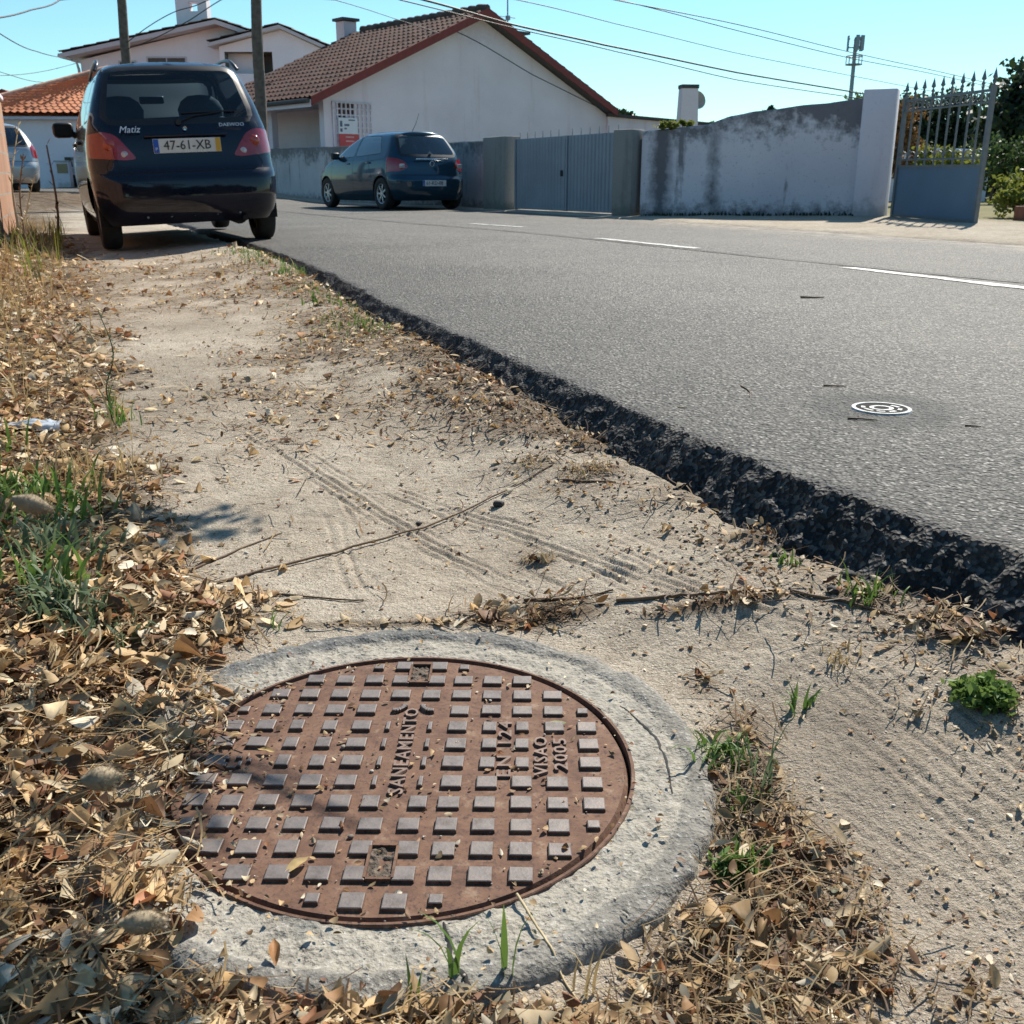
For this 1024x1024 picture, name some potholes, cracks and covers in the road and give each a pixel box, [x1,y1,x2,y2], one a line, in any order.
manhole cover [851,402,913,416]
manhole cover [59,629,717,1016]
crack [621,706,673,793]
